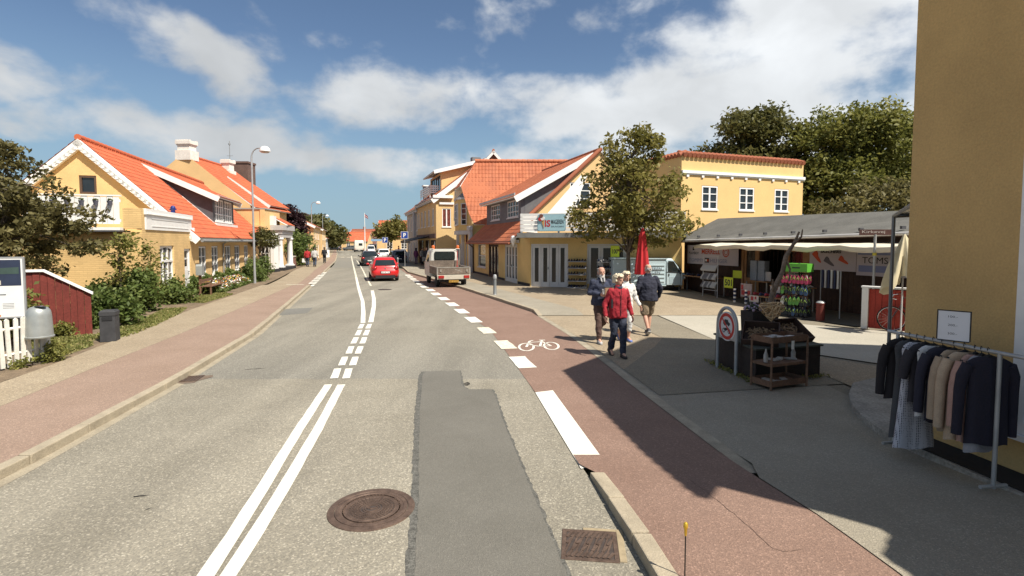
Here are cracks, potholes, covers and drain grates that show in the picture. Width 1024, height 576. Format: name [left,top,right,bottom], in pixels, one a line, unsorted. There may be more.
drain grate [561,527,627,564]
manhole cover [326,488,415,532]
